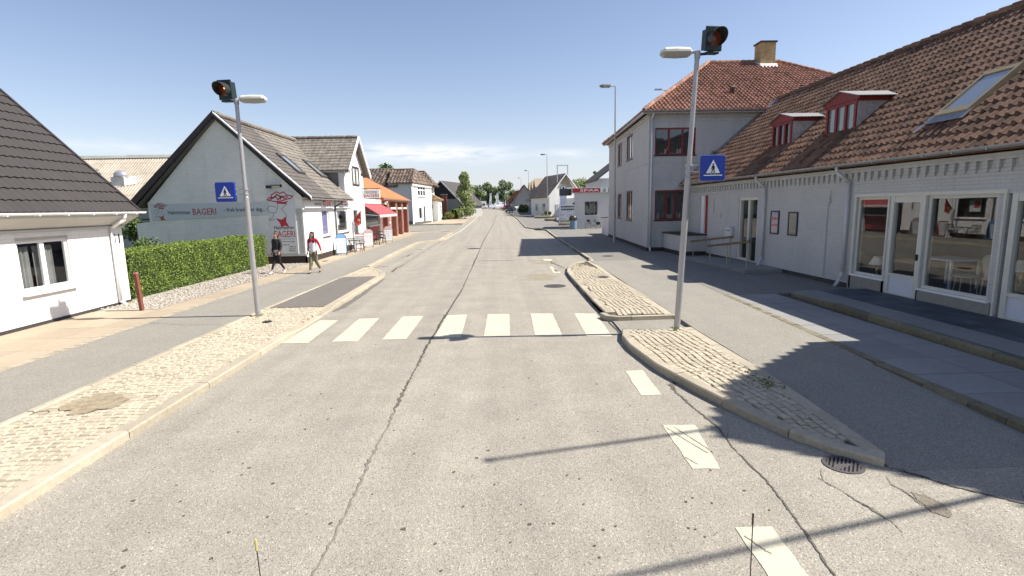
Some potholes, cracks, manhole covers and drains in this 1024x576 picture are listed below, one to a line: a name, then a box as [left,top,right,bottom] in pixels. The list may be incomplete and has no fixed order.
crack [818,464,1024,531]
drain grate [822,455,866,474]
